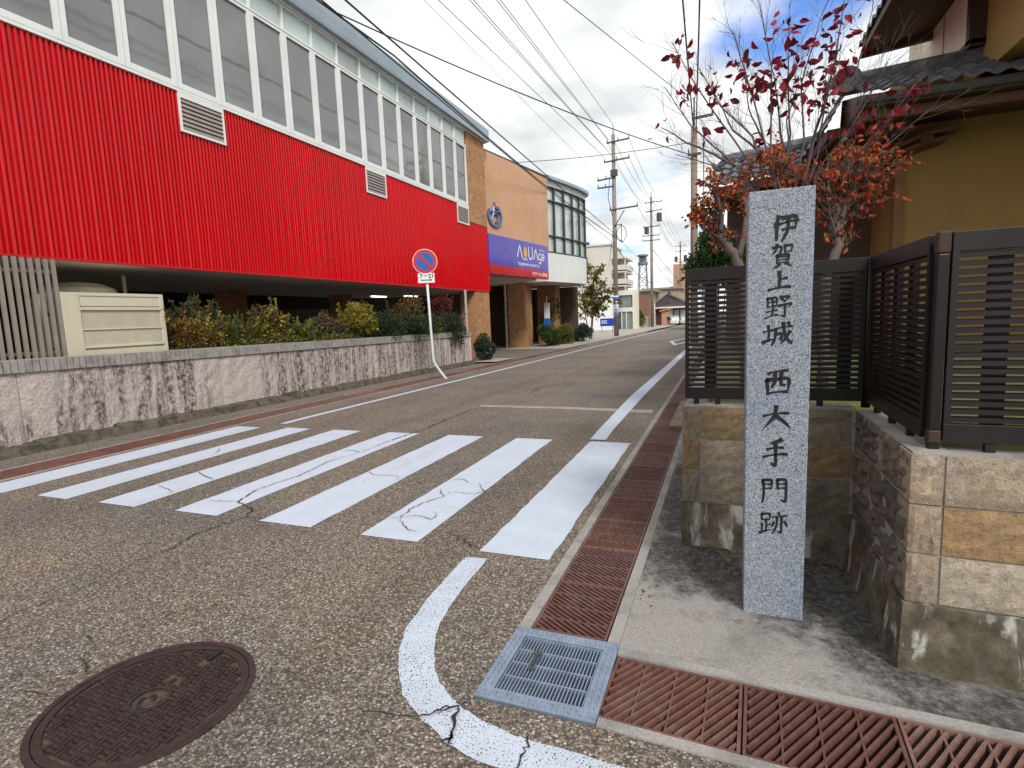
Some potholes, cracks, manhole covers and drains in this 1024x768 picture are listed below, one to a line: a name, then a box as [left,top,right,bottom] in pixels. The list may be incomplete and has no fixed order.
manhole cover [20,641,256,768]
crack [516,733,532,768]
crack [358,697,475,744]
crack [81,634,93,673]
drain grate [474,626,620,727]
